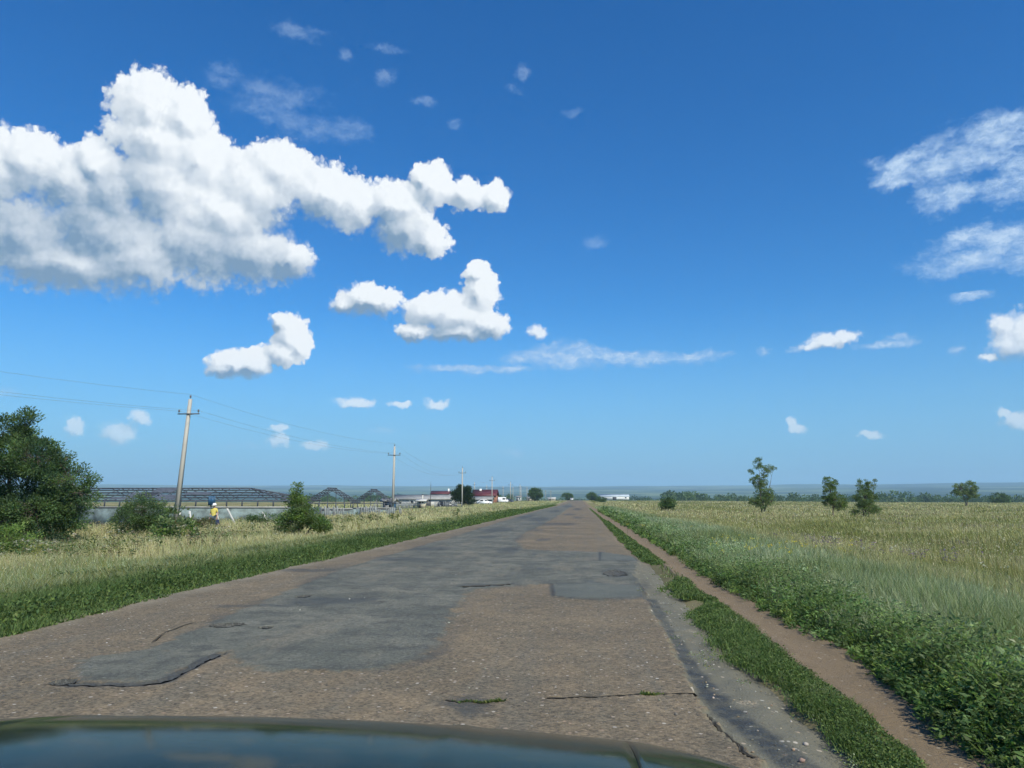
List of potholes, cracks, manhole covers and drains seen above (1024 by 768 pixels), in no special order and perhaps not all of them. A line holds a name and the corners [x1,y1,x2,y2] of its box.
crack [707,714,756,758]
crack [151,622,194,643]
